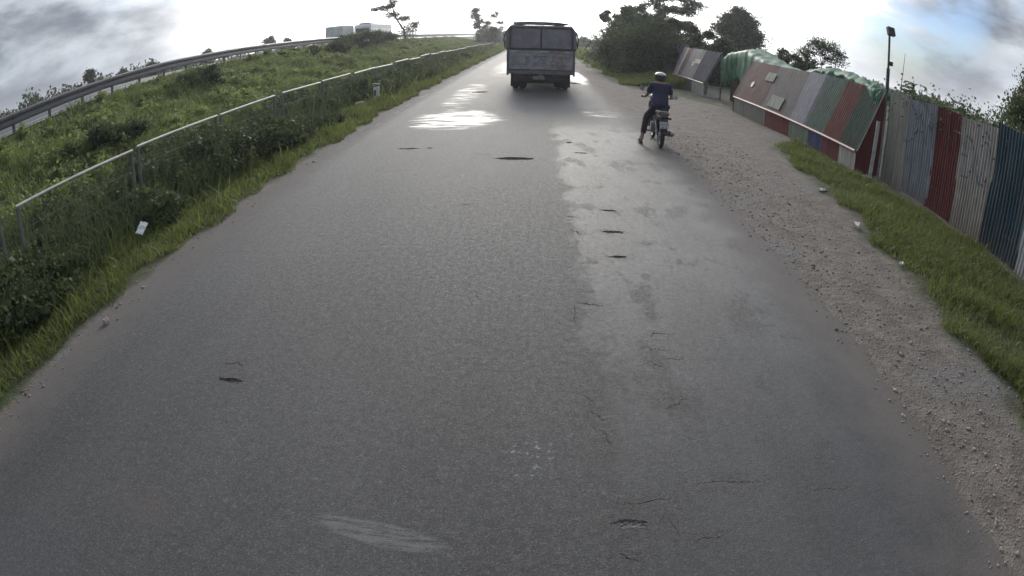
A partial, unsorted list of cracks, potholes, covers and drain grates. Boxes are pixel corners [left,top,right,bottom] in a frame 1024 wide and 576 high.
pothole [610,519,648,529]
crack [624,499,724,541]
